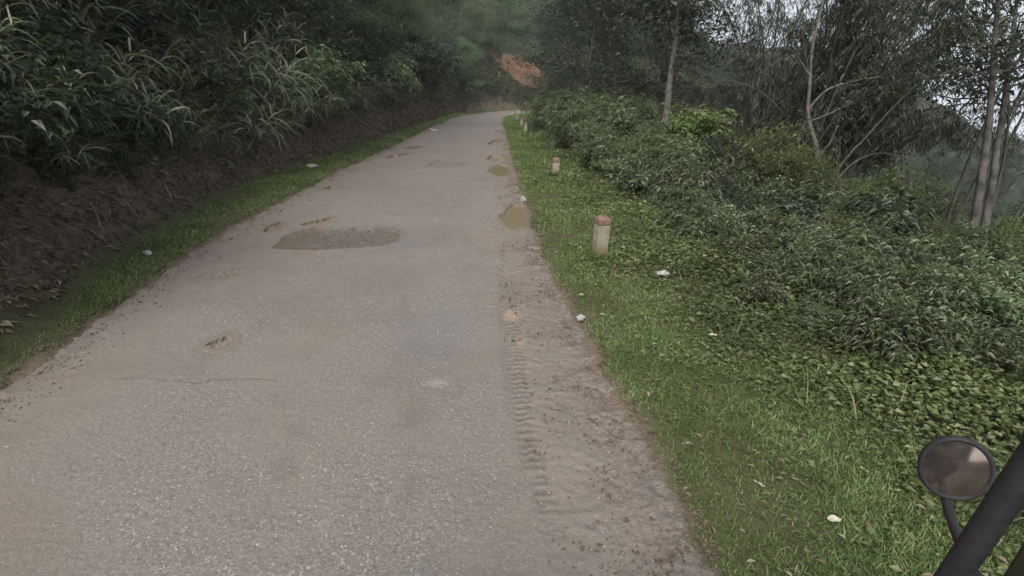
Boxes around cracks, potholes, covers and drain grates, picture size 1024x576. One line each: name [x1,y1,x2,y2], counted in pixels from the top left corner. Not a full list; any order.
pothole [266,225,406,252]
pothole [199,333,242,353]
pothole [258,221,288,234]
pothole [482,154,511,162]
pothole [495,203,531,231]
pothole [483,164,515,178]
pothole [296,216,339,227]
